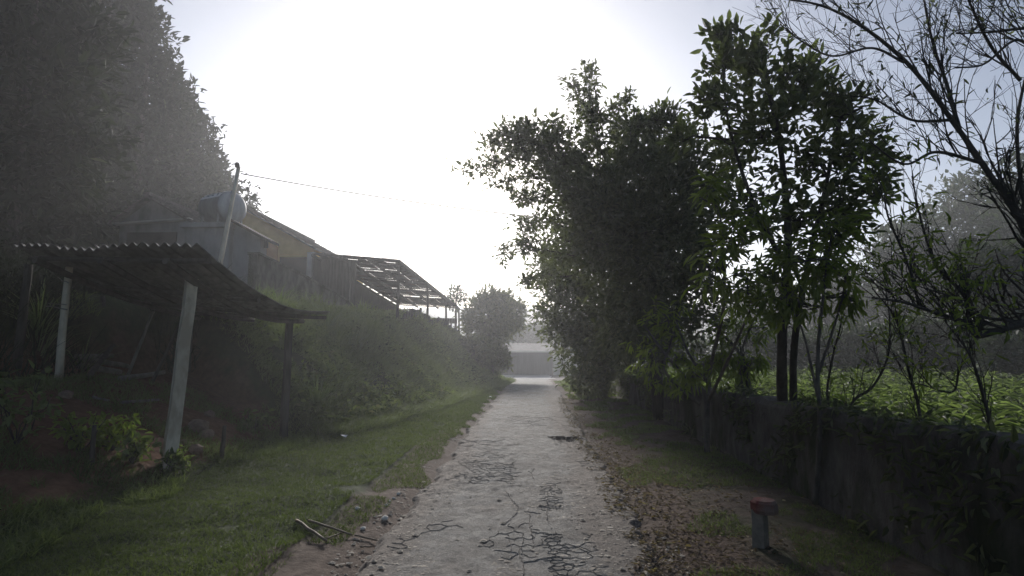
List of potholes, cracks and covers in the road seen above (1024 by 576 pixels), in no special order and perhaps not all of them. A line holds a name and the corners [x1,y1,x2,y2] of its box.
crack [387,520,463,549]
crack [447,416,609,576]
